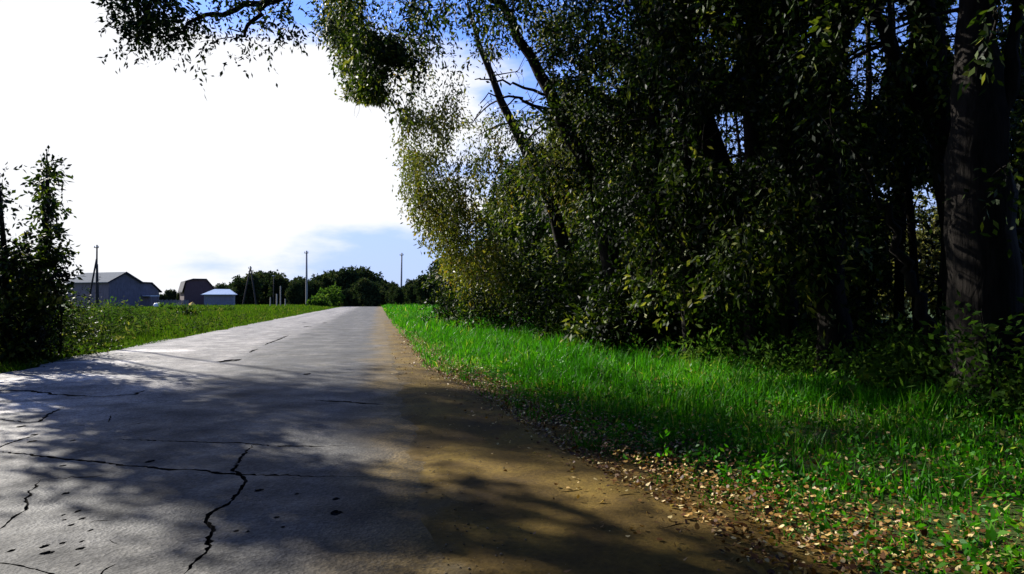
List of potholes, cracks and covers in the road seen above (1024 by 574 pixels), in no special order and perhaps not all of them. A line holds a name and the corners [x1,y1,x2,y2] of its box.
crack [0,390,368,574]
